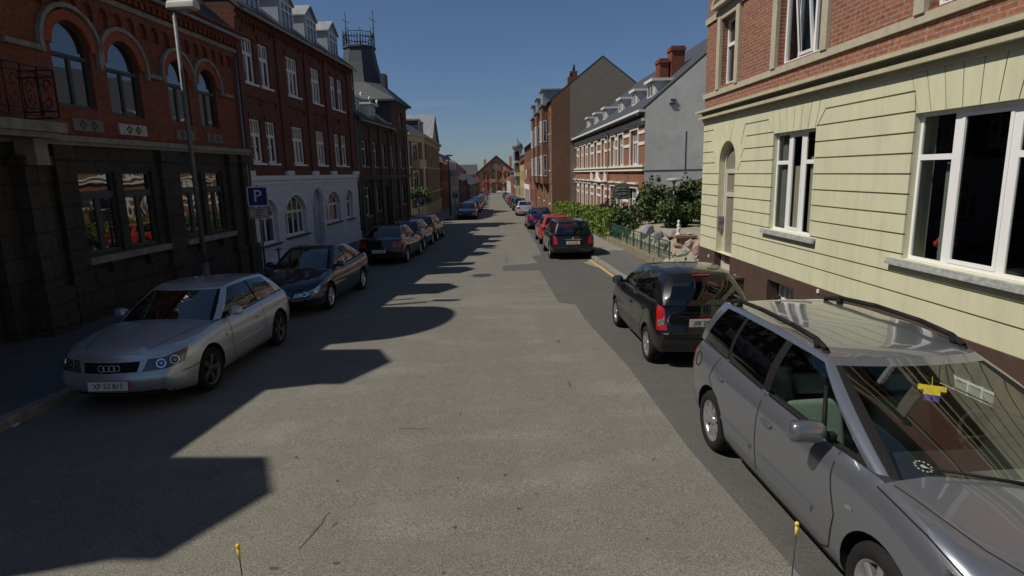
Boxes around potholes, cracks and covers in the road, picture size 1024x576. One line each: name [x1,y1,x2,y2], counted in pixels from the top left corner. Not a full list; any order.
crack [299,512,338,549]
